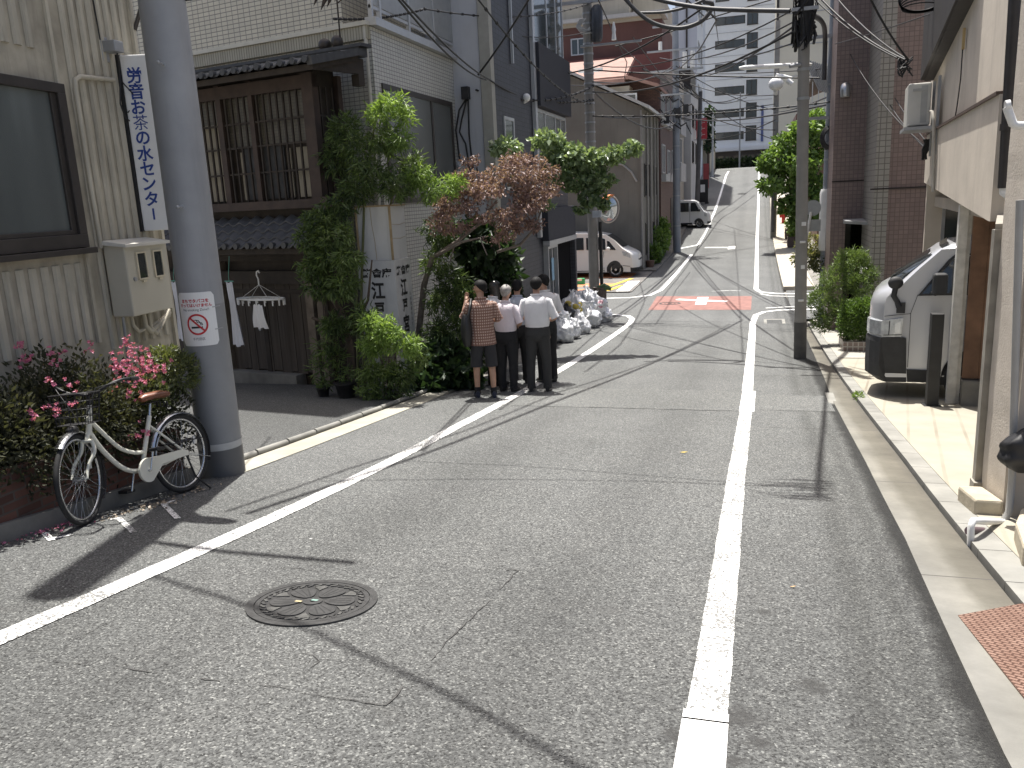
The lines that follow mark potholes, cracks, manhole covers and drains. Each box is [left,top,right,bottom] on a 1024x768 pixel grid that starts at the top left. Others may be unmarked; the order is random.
manhole cover [245,580,378,627]
crack [56,569,519,705]
